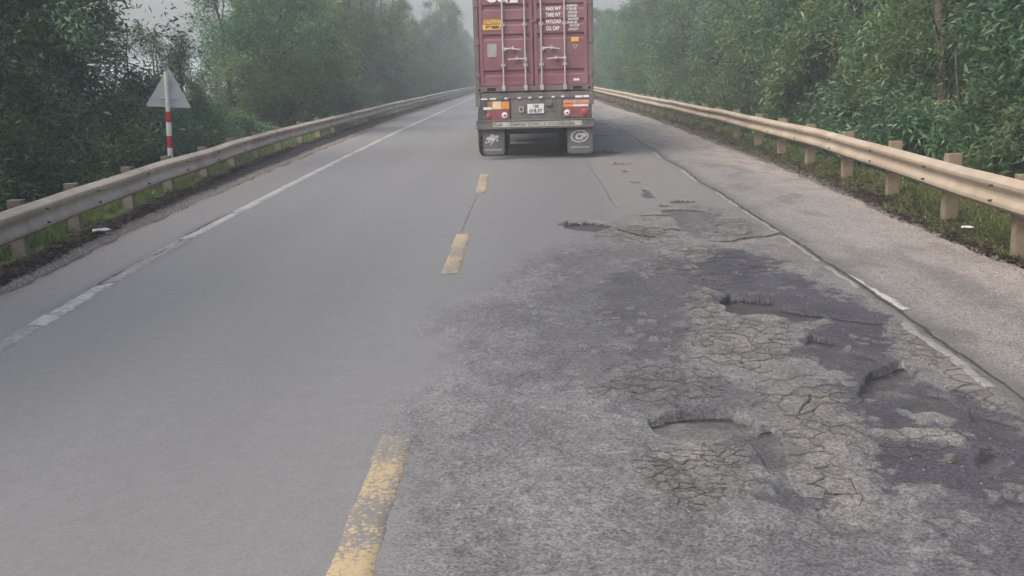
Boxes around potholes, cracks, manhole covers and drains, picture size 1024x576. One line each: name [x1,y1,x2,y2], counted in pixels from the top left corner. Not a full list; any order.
crack [595,138,1024,510]
pothole [724,299,825,322]
pothole [652,418,757,442]
pothole [978,453,1009,474]
pothole [750,431,805,516]
pothole [562,222,614,232]
pothole [861,367,969,418]
